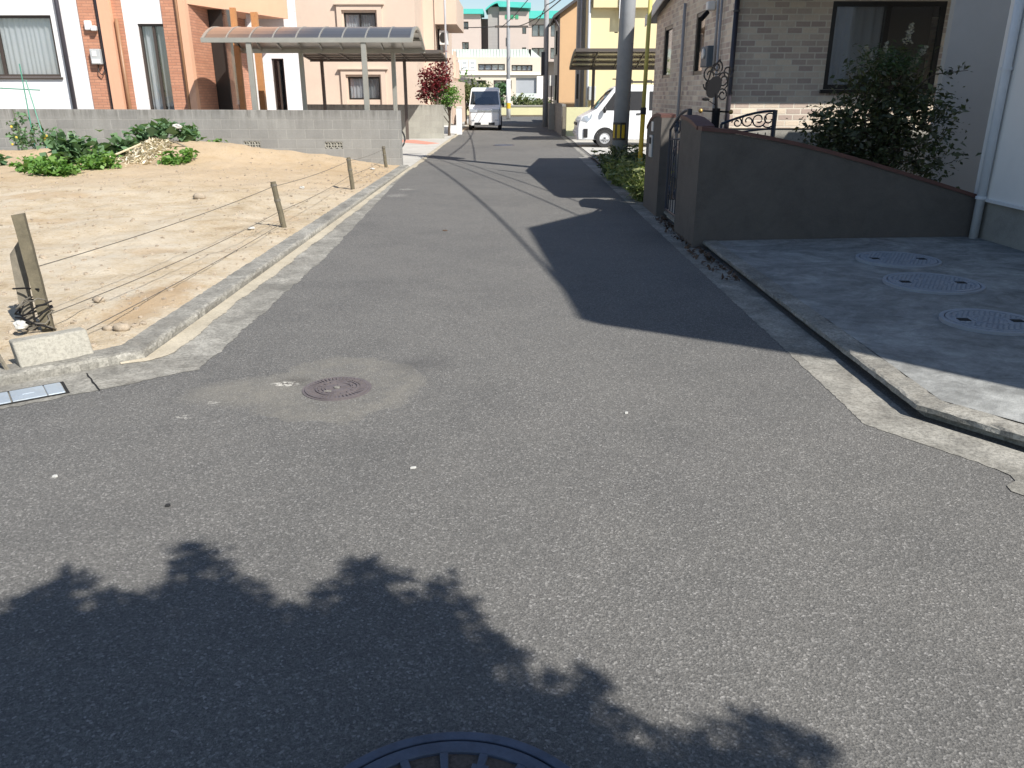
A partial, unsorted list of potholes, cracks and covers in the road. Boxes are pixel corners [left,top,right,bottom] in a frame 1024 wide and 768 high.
manhole cover [302,377,372,401]
manhole cover [343,732,570,768]
